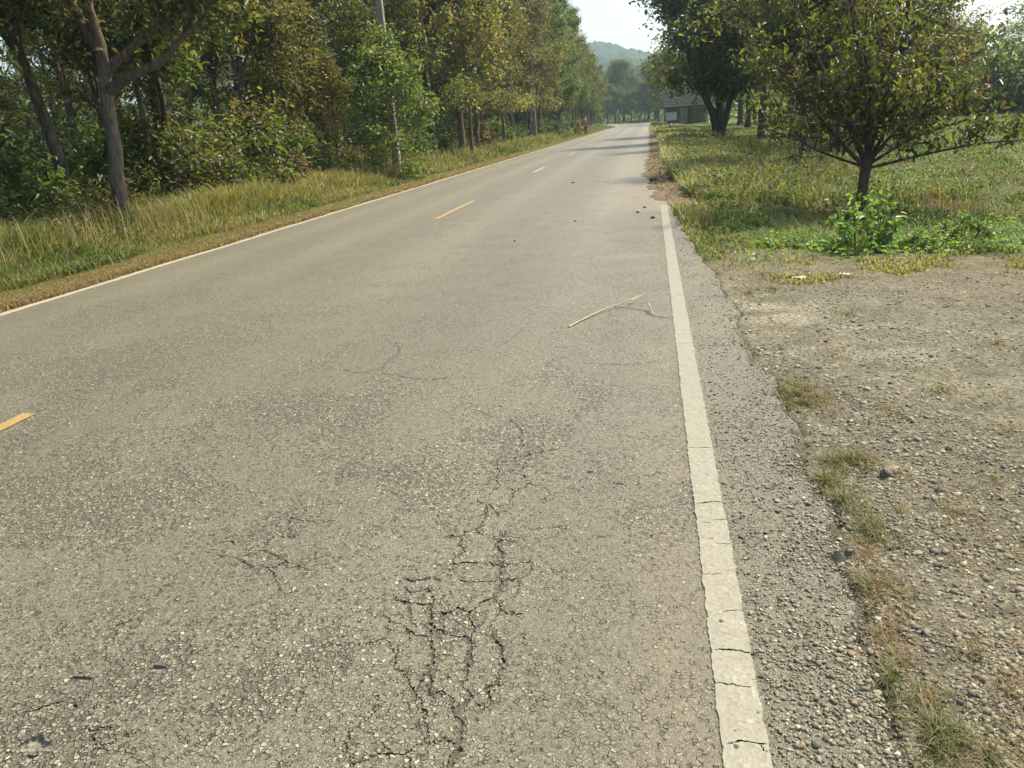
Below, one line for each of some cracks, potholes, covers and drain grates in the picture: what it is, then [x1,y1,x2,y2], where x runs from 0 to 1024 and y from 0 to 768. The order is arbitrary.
crack [219,520,340,594]
crack [337,421,552,768]
crack [88,727,136,759]
